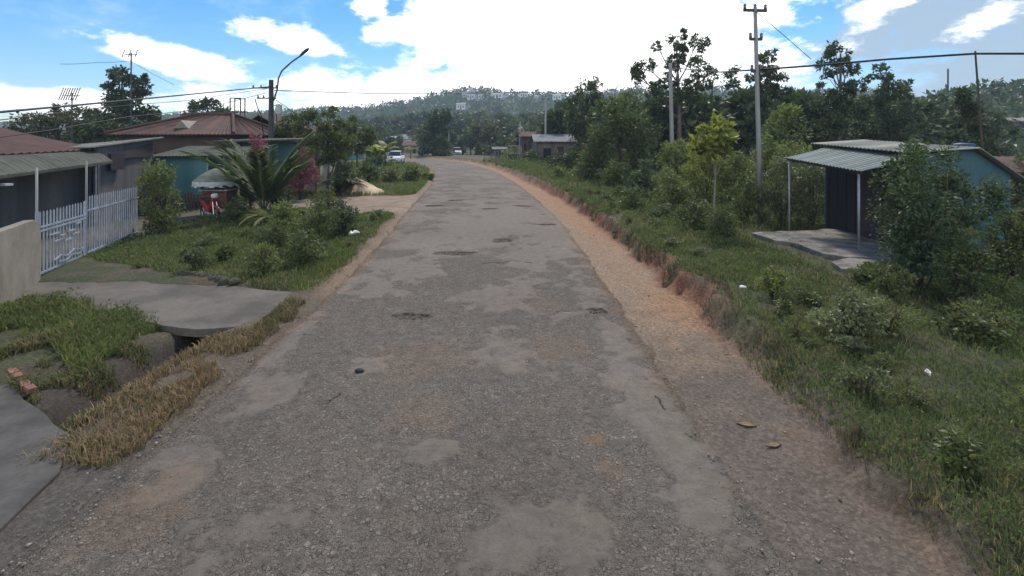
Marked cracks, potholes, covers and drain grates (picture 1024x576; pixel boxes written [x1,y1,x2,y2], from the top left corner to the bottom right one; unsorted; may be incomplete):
pothole [392,313,433,321]
